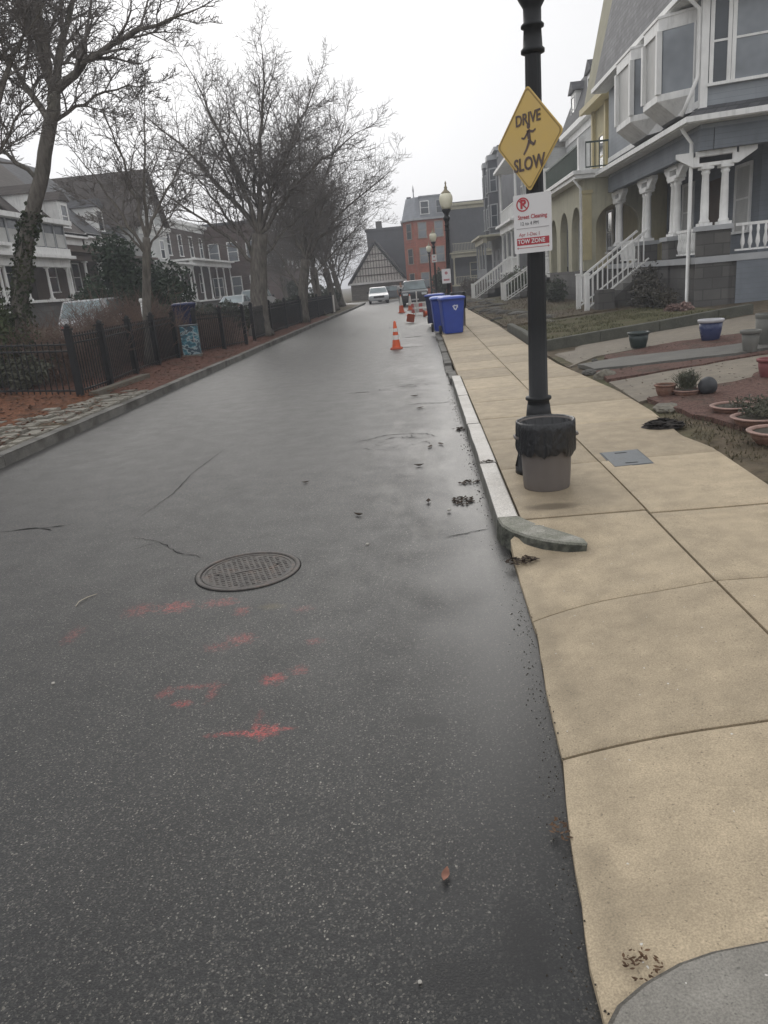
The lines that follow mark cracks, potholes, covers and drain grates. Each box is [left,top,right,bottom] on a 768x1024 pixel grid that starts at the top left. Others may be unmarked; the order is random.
utility cover [600,449,654,467]
manhole cover [195,551,301,592]
